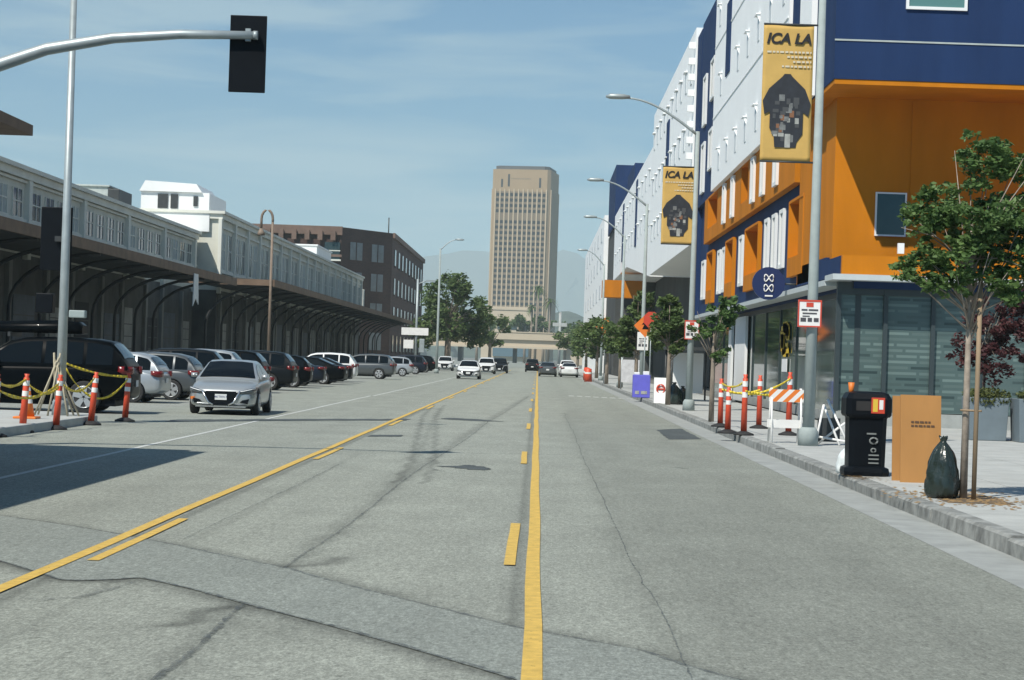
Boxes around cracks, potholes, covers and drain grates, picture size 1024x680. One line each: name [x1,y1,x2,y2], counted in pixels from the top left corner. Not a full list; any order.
crack [151,604,244,680]
